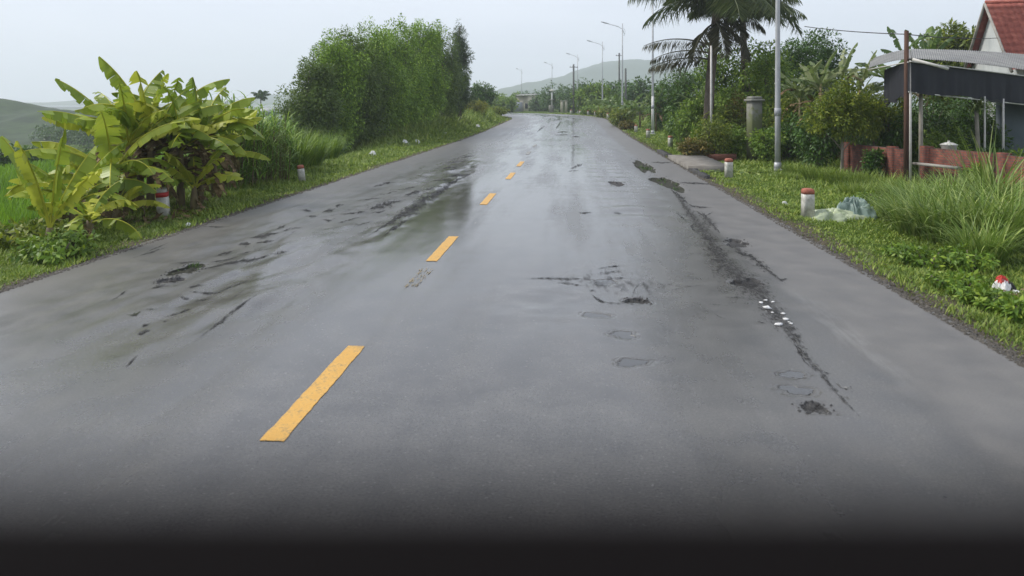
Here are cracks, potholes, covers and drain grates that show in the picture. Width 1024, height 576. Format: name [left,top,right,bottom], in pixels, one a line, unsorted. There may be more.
crack [114,156,470,335]
pothole [768,369,811,380]
crack [793,340,851,398]
pothole [621,296,654,305]
pothole [791,400,837,416]
pothole [771,383,820,397]
pothole [605,329,641,341]
pothole [647,174,687,194]
pothole [611,356,655,369]
pothole [629,158,657,174]
